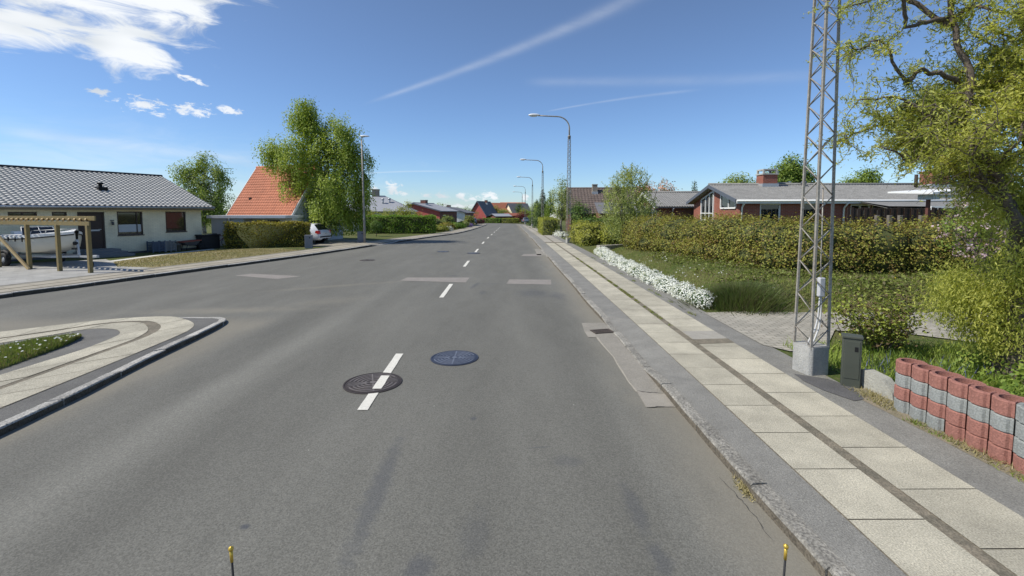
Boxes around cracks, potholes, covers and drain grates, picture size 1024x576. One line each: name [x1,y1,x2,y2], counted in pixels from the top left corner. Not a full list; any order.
manhole cover [343,372,402,394]
manhole cover [430,350,478,366]
